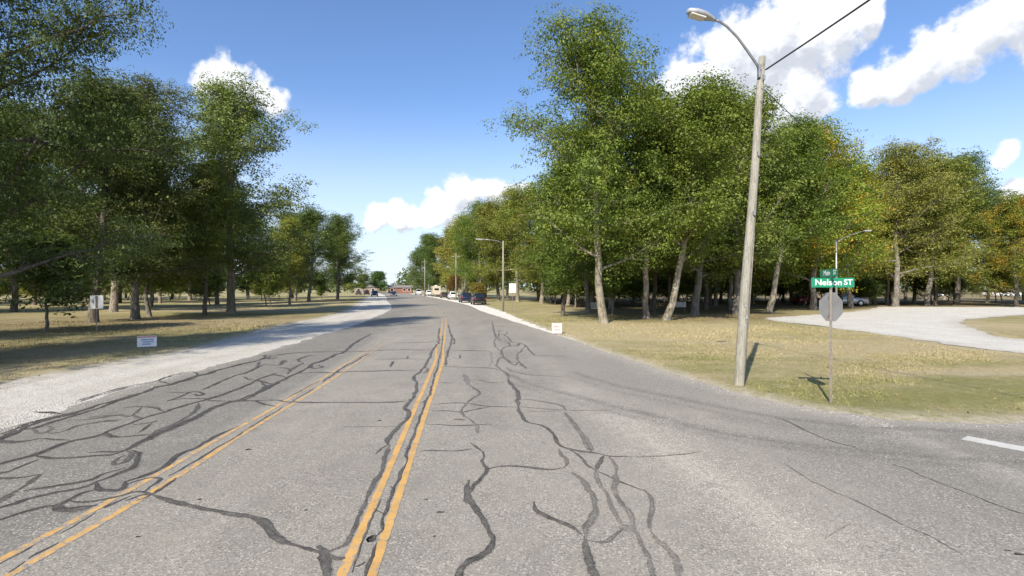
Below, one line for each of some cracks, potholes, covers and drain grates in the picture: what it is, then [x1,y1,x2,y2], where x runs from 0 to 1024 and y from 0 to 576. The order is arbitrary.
crack [776,417,854,447]
crack [1,321,559,576]
